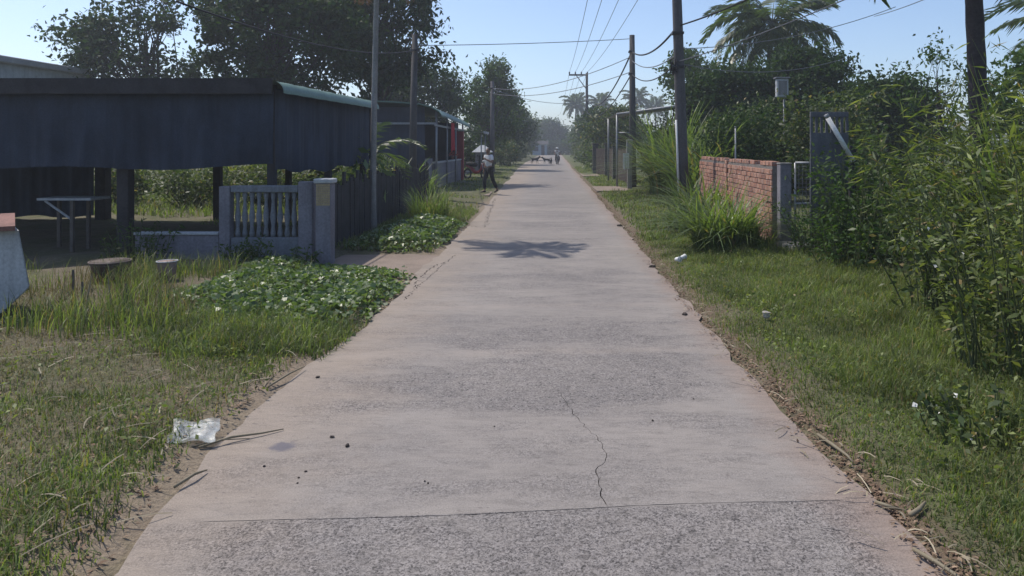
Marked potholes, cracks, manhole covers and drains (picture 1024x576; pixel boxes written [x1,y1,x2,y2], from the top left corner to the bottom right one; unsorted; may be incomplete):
crack [561,395,607,504]
